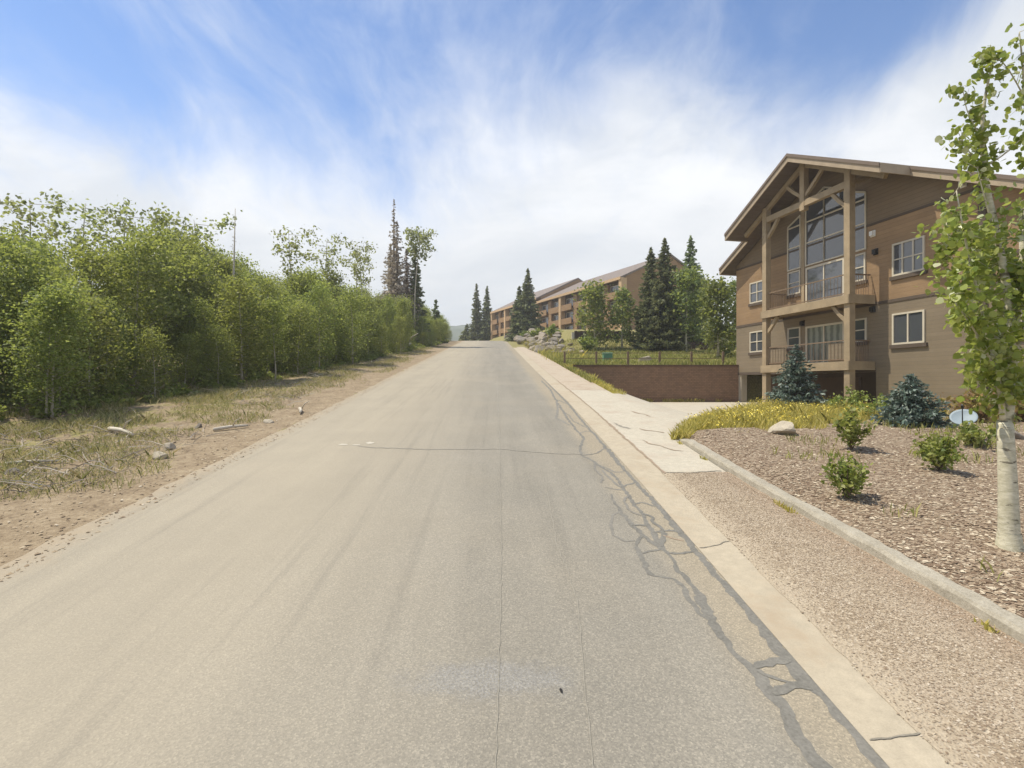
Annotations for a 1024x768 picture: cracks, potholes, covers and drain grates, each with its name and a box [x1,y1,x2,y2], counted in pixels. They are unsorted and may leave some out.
crack [615,411,681,451]
